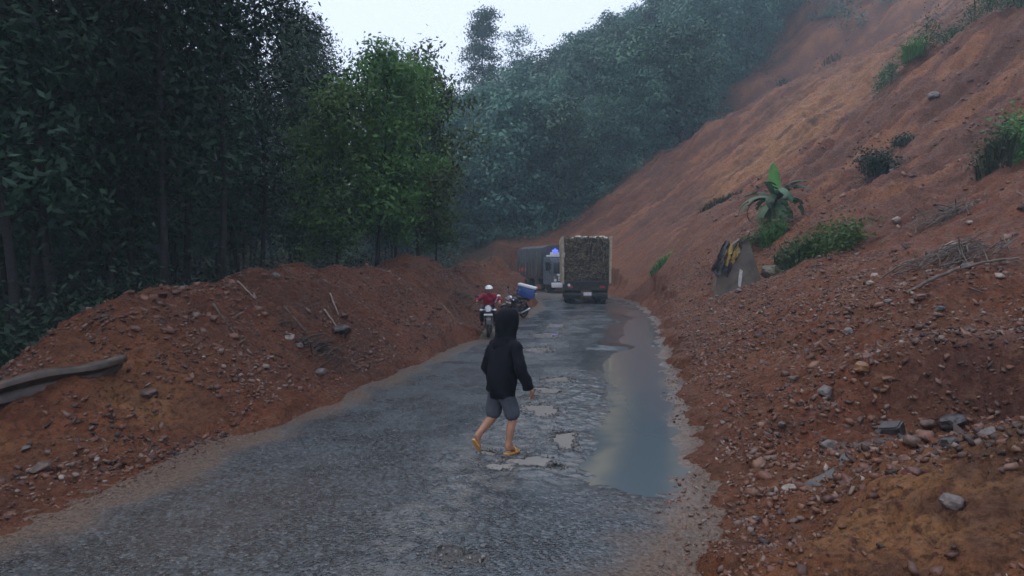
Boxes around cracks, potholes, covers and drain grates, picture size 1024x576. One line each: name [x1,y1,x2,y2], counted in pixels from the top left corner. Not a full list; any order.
pothole [518,401,570,419]
pothole [478,459,519,471]
pothole [532,385,567,394]
pothole [416,543,491,568]
pothole [545,428,582,452]
pothole [499,451,561,469]
